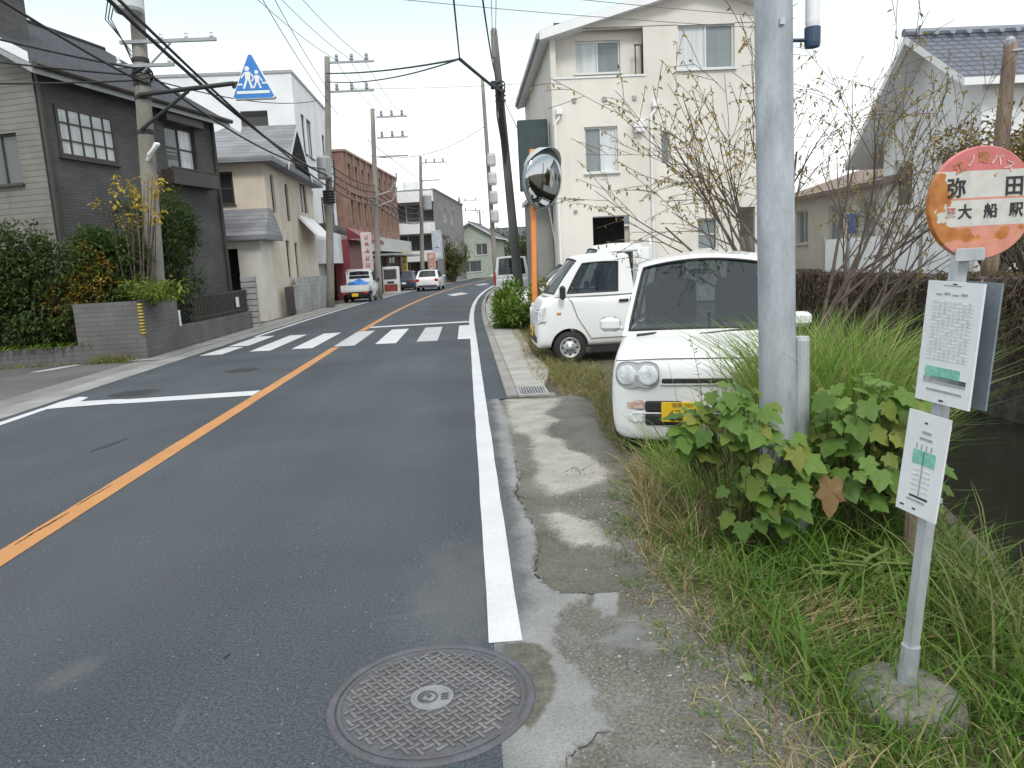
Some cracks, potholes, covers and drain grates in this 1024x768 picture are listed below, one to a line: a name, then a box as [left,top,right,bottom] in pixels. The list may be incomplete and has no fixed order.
crack [566,731,609,762]
manhole cover [326,644,536,768]
manhole cover [107,389,161,398]
drain grate [516,386,549,396]
